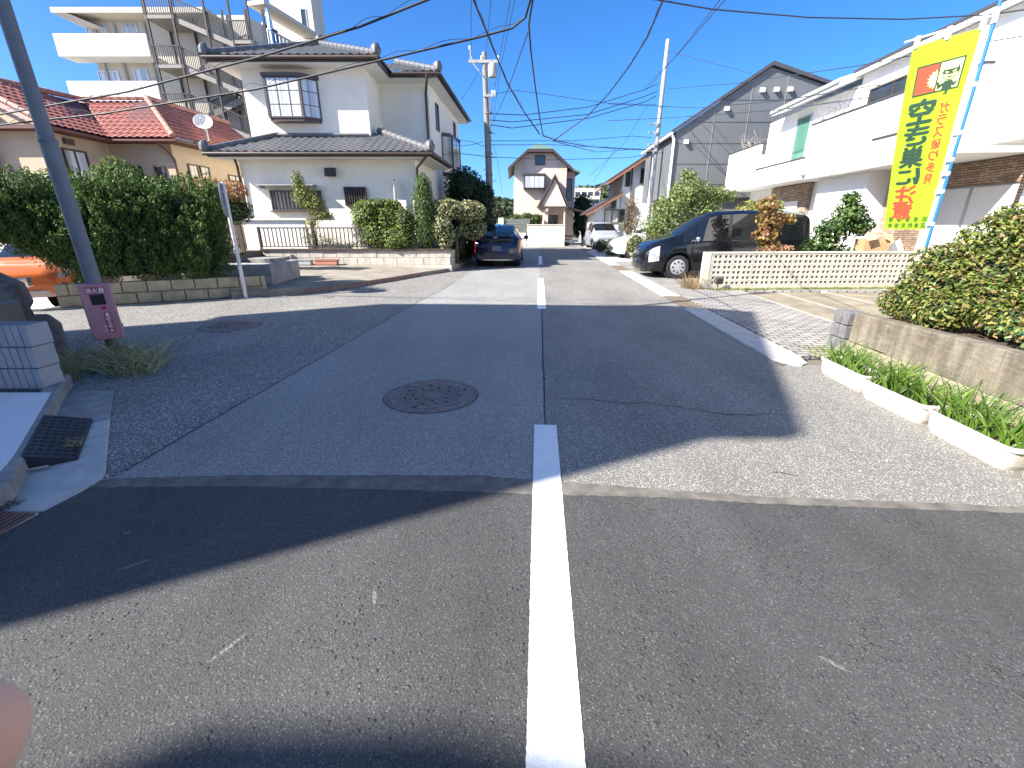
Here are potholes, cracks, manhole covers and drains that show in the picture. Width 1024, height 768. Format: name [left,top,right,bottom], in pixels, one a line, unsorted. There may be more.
manhole cover [383,379,479,414]
crack [557,398,802,417]
manhole cover [197,320,262,332]
